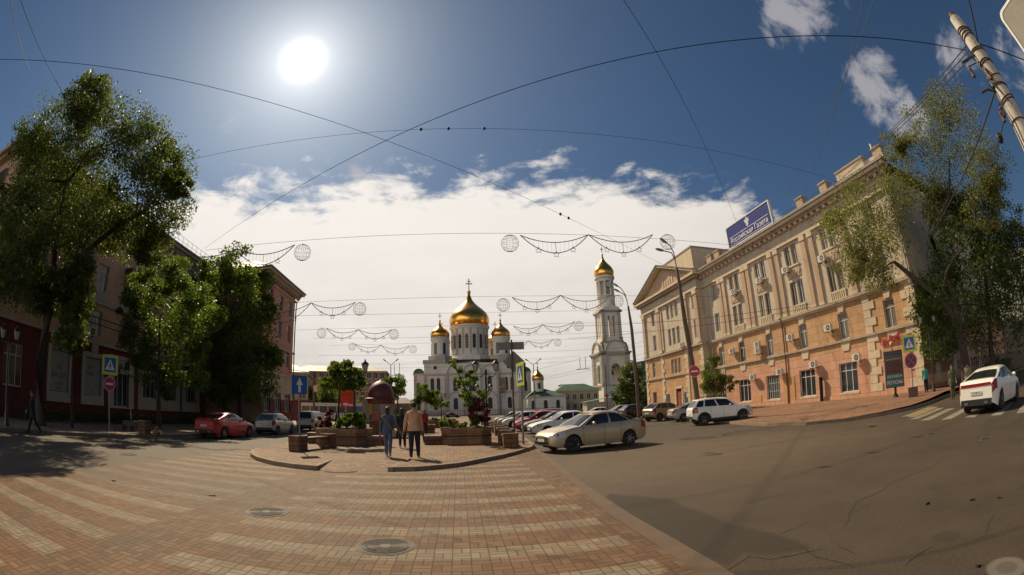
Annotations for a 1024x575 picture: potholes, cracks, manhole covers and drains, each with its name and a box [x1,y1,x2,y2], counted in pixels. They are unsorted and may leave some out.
crack [809,453,944,568]
manhole cover [245,507,288,517]
manhole cover [355,538,416,556]
